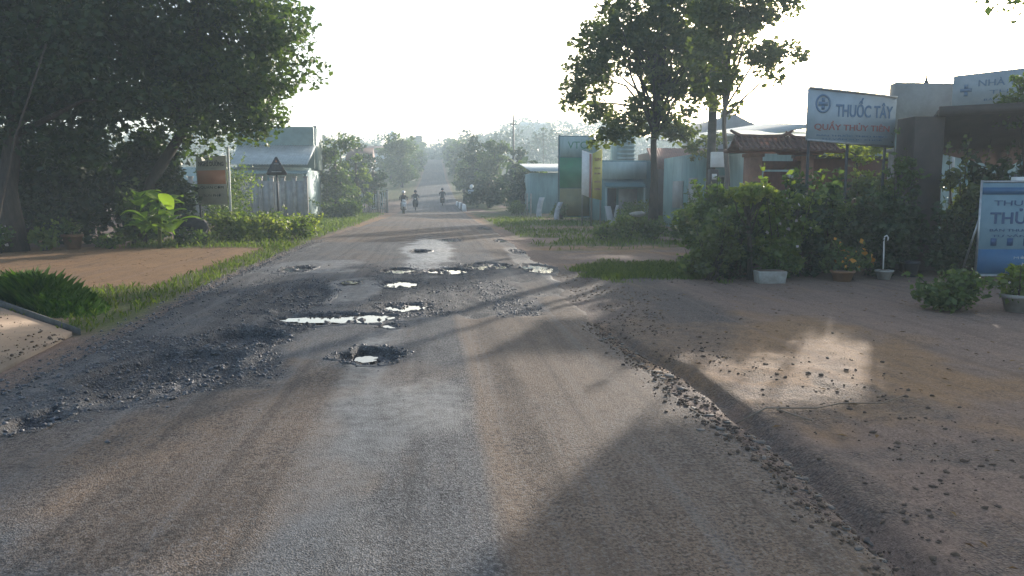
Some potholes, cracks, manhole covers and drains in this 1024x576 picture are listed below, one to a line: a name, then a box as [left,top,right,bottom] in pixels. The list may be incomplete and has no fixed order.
pothole [371,267,425,275]
pothole [372,300,442,313]
pothole [271,264,320,274]
pothole [323,343,414,367]
pothole [263,309,419,328]
pothole [517,262,560,276]
pothole [374,322,406,330]
pothole [455,261,522,271]
pothole [372,278,424,290]
